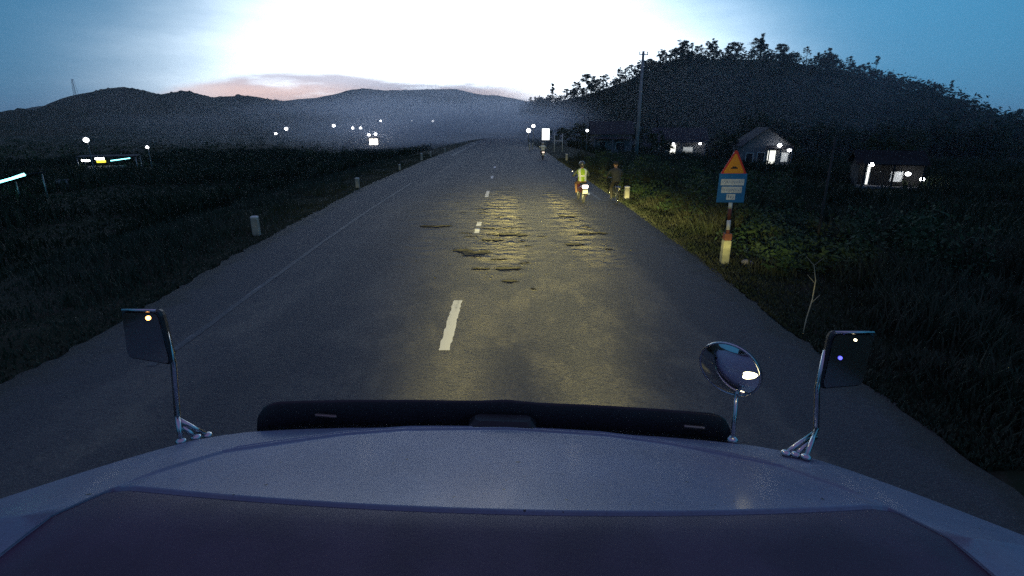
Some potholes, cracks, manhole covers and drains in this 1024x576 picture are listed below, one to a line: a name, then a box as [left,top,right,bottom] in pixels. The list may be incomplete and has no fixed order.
pothole [450,248,493,257]
